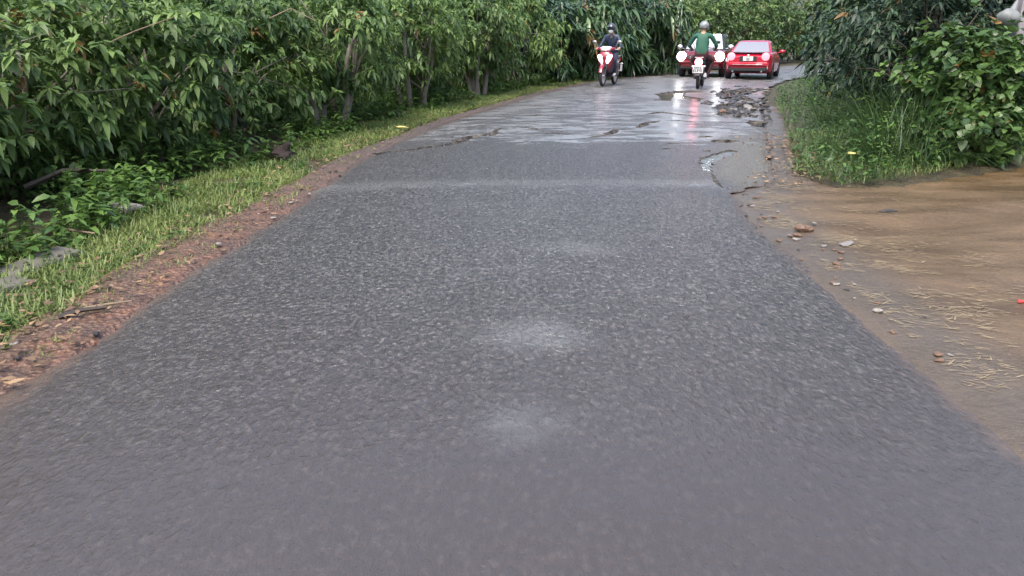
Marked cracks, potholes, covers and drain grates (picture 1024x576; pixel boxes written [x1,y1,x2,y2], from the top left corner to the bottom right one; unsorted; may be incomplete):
crack [372,115,566,155]
crack [588,112,692,150]
pothole [655,90,702,101]
pothole [713,88,766,102]
pothole [716,103,758,119]
pothole [698,150,738,172]
